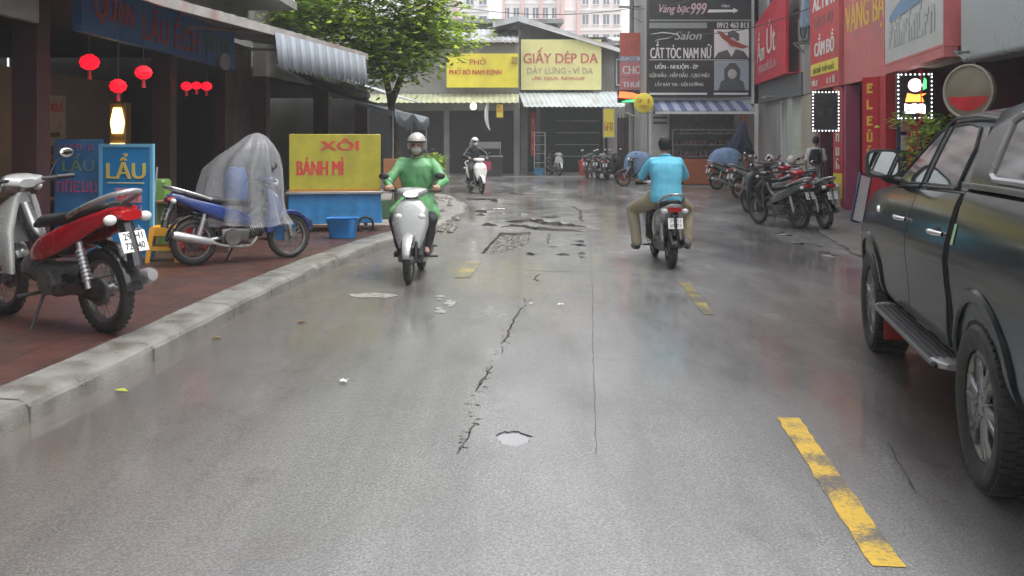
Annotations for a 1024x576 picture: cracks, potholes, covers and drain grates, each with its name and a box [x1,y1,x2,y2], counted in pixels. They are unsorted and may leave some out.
pothole [496,431,533,446]
crack [888,443,917,493]
crack [456,192,597,455]
pothole [480,232,531,255]
